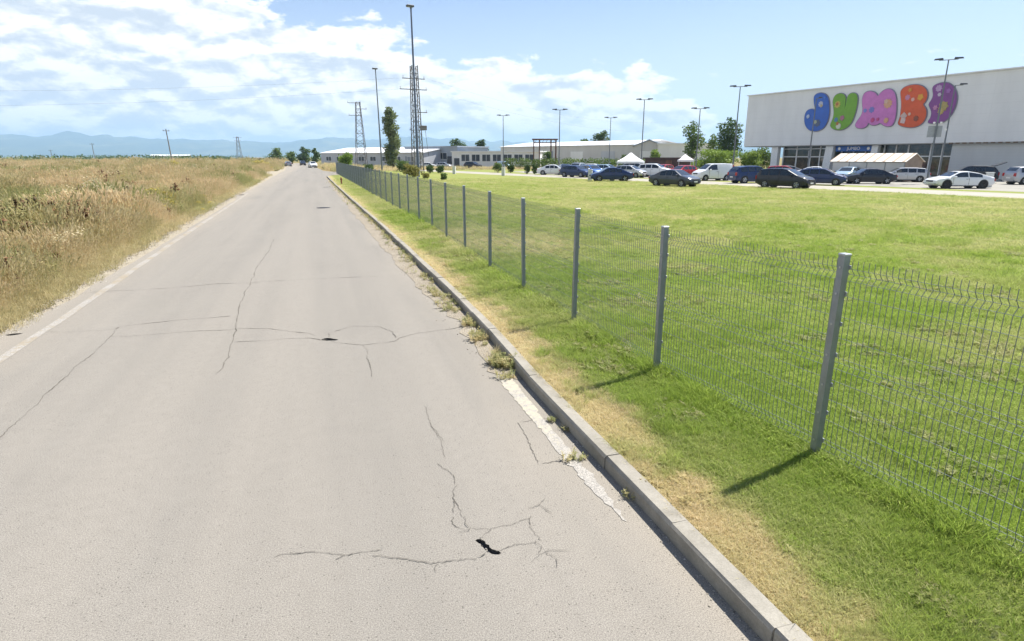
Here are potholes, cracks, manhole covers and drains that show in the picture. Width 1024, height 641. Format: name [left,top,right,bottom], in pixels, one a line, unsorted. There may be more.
crack [0,239,461,437]
crack [275,408,557,571]
pothole [475,539,501,555]
